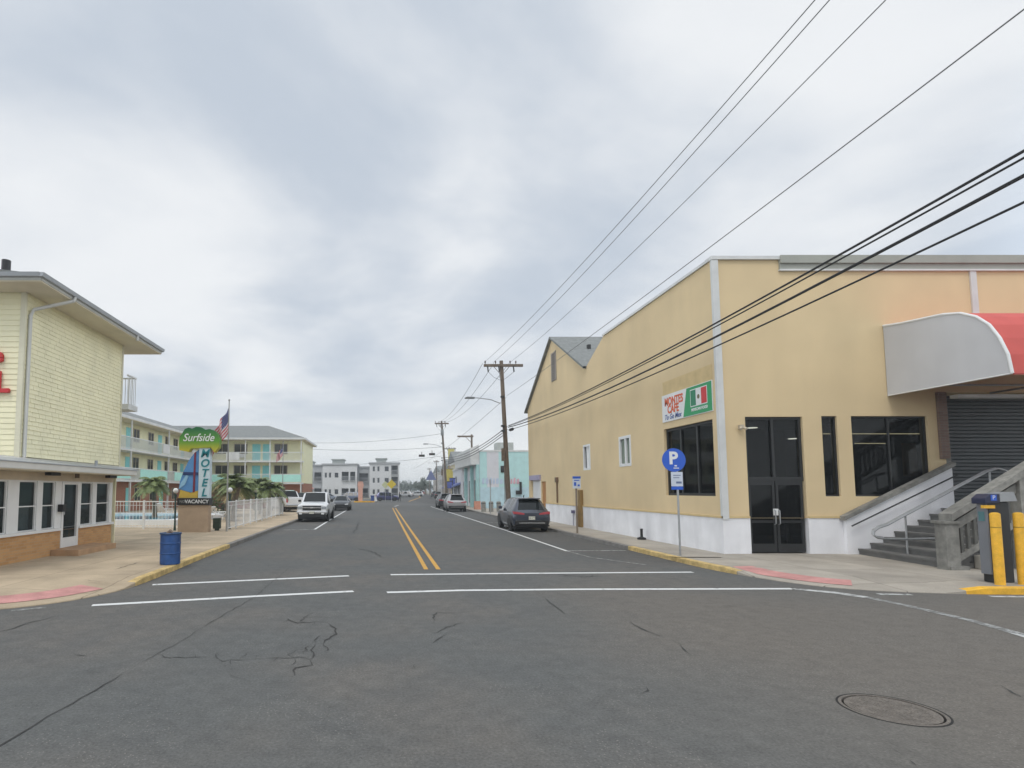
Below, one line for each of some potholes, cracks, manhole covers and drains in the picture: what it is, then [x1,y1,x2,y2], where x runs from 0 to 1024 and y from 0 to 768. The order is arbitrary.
manhole cover [835,693,954,727]
crack [162,613,337,678]
